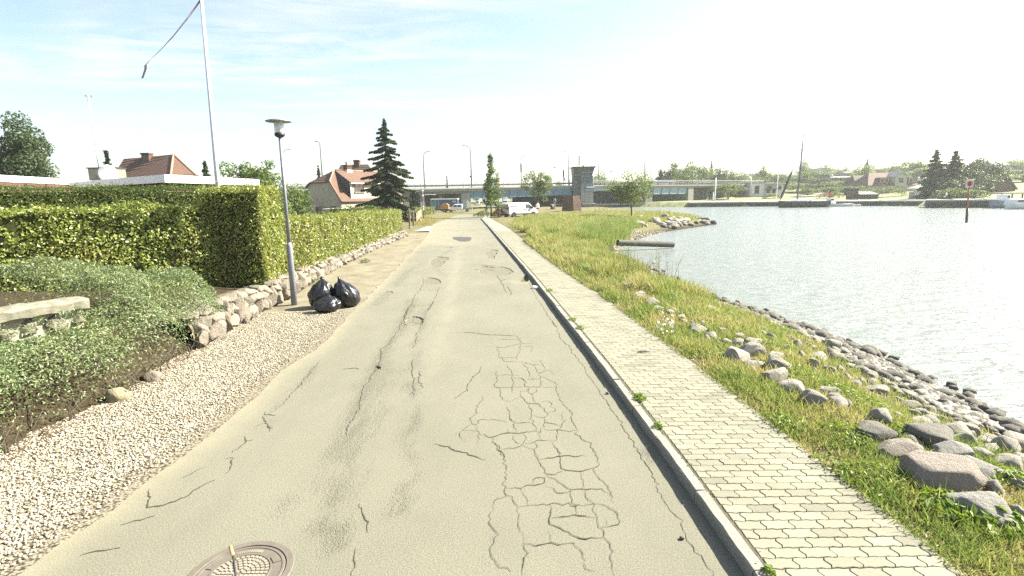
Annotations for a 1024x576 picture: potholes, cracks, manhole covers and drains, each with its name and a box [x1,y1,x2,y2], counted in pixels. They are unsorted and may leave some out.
crack [121,470,207,525]
crack [438,336,620,576]
crack [531,287,714,576]
crack [351,504,369,576]
crack [345,282,437,435]
pothole [479,266,513,276]
manhole cover [187,541,294,576]
pothole [429,257,448,267]
crack [226,362,319,473]
